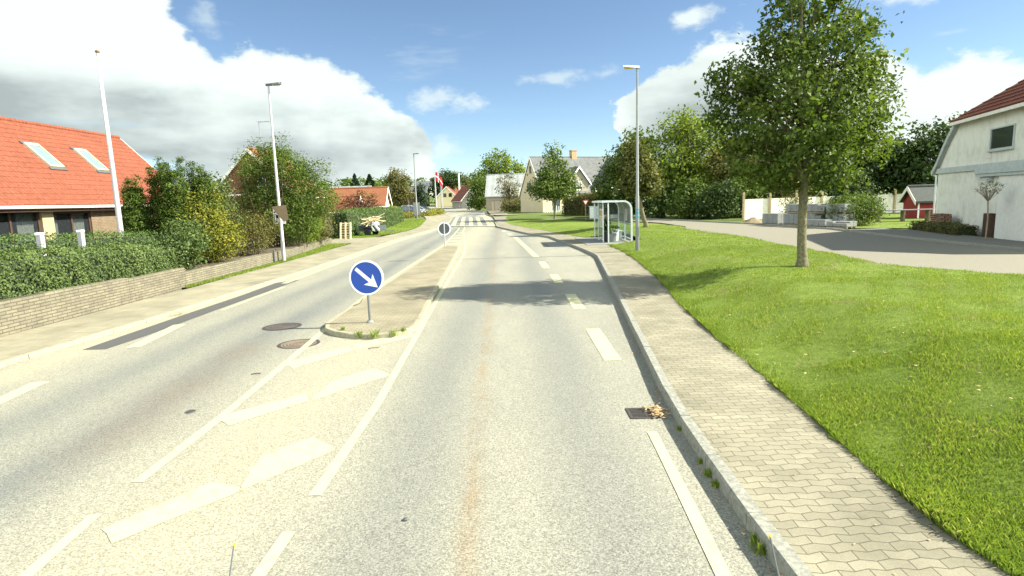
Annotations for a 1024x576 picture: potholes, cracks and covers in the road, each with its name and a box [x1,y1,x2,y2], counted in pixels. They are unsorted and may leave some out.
manhole cover [277,339,320,349]
drain grate [625,407,666,419]
manhole cover [262,323,302,331]
